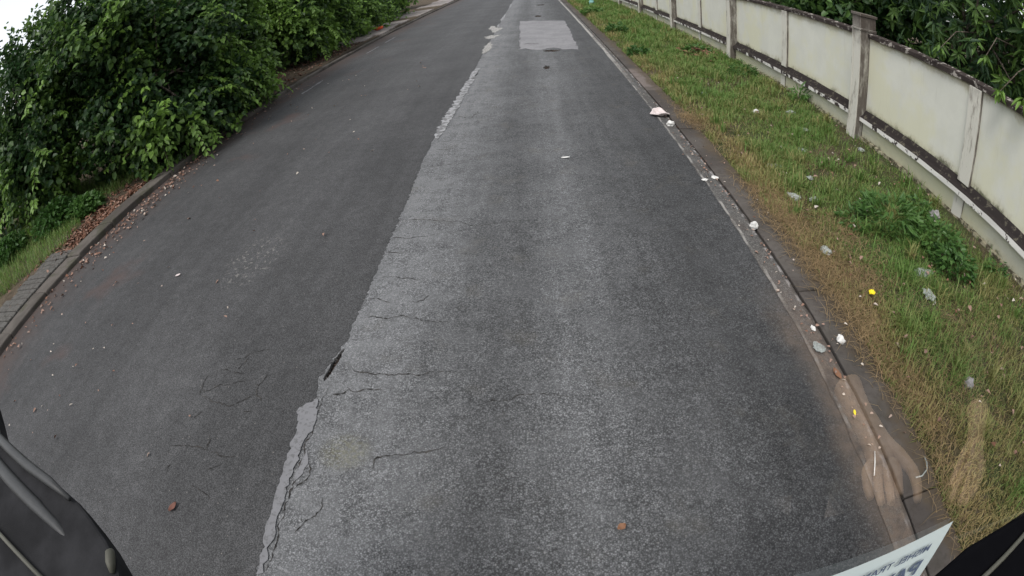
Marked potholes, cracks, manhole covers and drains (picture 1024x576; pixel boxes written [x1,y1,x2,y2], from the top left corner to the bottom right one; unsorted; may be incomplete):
crack [166,349,269,499]
crack [265,371,459,573]
crack [366,276,449,322]
